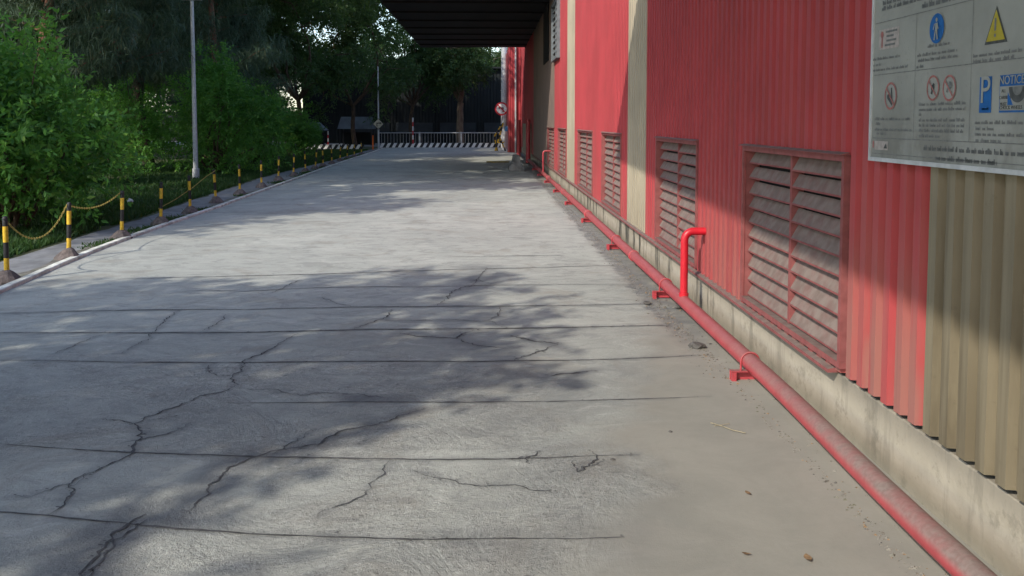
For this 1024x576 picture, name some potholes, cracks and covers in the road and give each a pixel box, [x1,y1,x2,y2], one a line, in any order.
crack [323,269,559,360]
crack [413,470,556,495]
crack [14,334,296,576]
crack [571,451,605,472]
crack [180,408,424,519]
